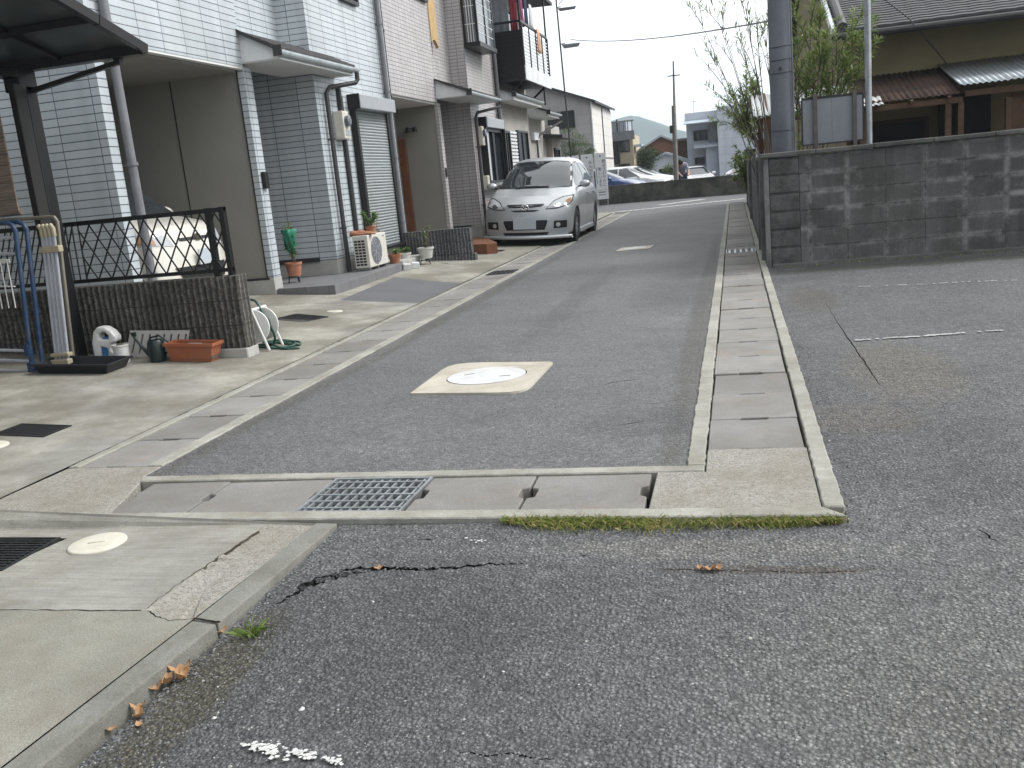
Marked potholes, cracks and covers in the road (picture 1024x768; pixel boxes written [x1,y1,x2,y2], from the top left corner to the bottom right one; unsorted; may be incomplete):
manhole cover [410,362,553,395]
manhole cover [67,532,127,555]
drain grate [278,314,328,322]
drain grate [294,476,434,512]
drain grate [0,423,72,437]
crack [276,562,527,604]
drain grate [0,537,61,571]
crack [460,751,554,760]
